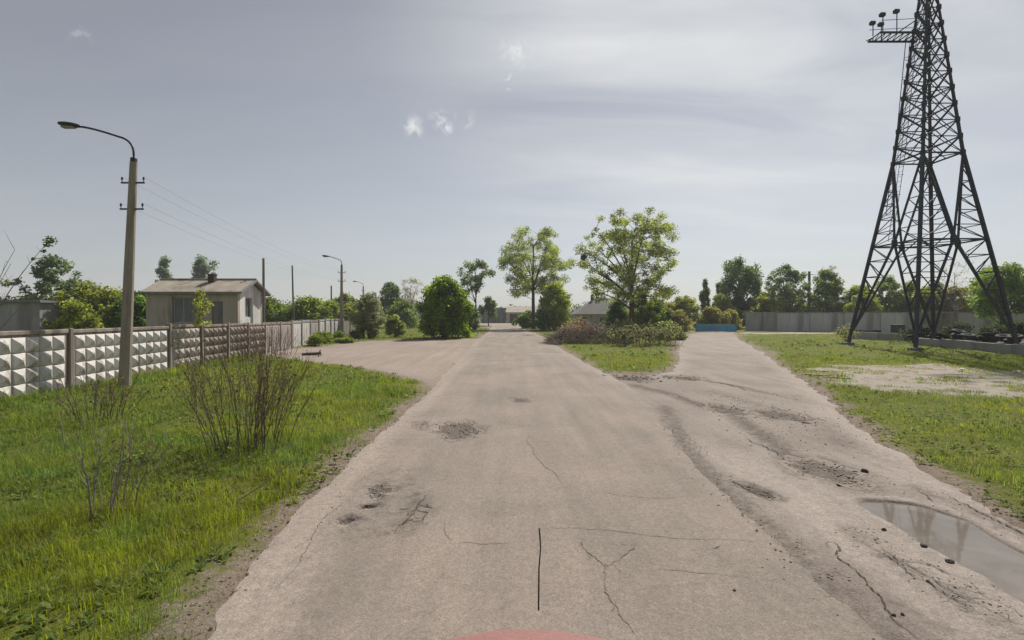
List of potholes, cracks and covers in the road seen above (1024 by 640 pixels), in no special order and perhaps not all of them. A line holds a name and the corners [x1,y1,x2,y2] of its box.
pothole [736,482,780,501]
crack [827,541,1023,640]
crack [274,504,341,590]
crack [538,527,754,634]
pothole [778,455,878,491]
crack [395,496,507,544]
pothole [365,482,397,501]
pothole [429,420,487,442]
